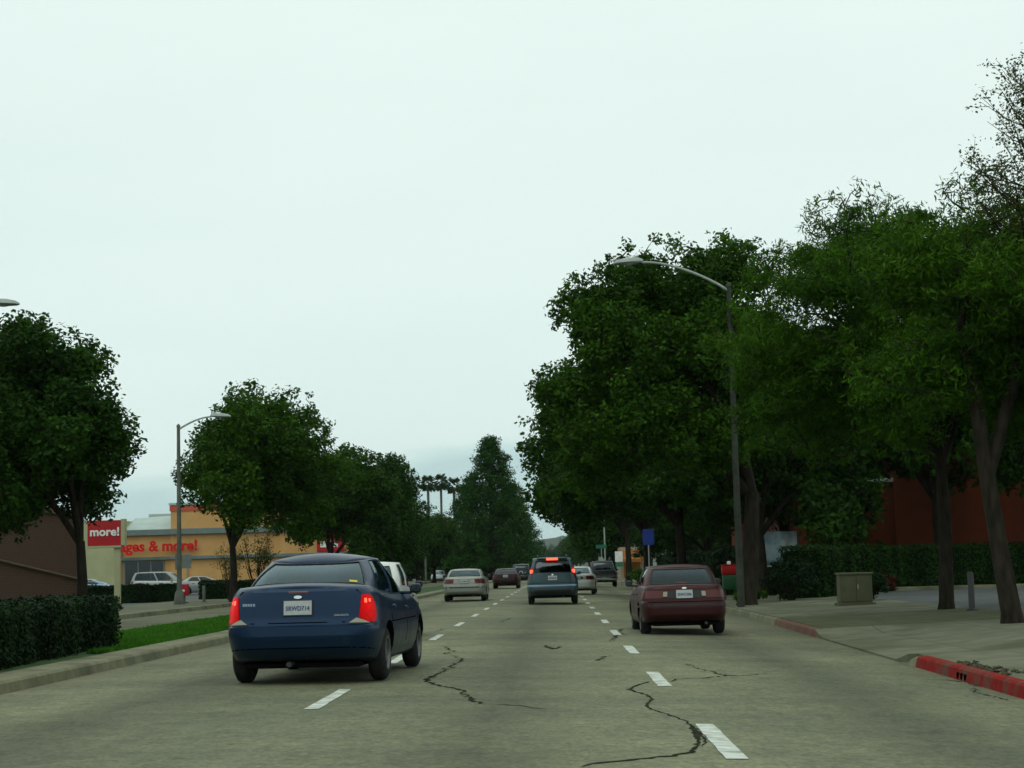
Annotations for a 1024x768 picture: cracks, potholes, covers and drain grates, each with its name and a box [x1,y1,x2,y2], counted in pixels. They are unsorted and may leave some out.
crack [672,664,766,690]
crack [423,629,482,704]
crack [584,681,707,766]
